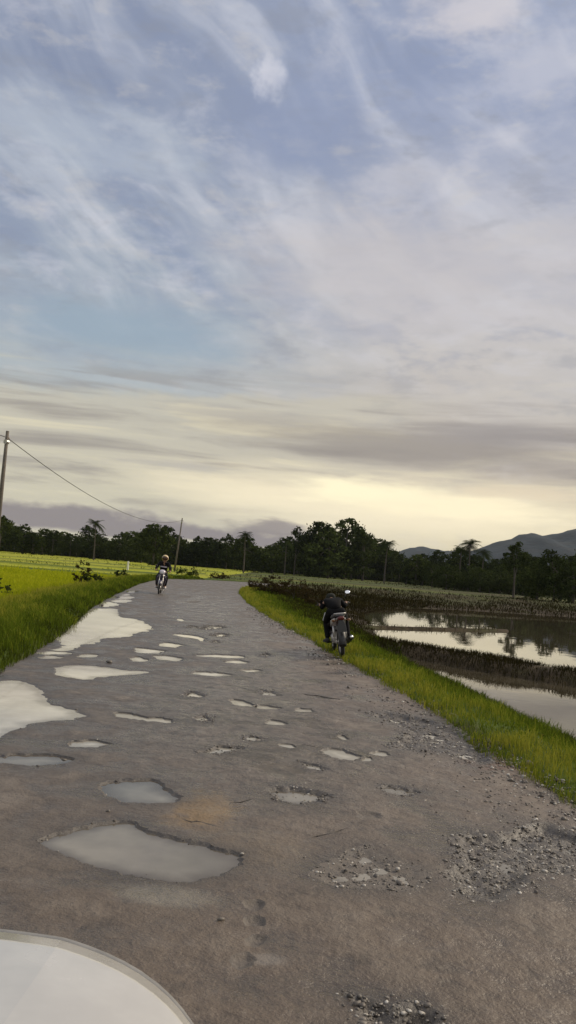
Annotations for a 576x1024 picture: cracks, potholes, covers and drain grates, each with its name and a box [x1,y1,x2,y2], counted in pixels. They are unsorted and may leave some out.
pothole [96,778,184,804]
pothole [67,739,112,747]
pothole [320,747,362,760]
pothole [335,978,452,1024]
pothole [48,608,155,651]
pothole [300,844,443,894]
pothole [376,781,429,801]
pothole [0,679,89,741]
pothole [435,817,576,907]
pothole [36,819,244,883]
pothole [0,753,75,766]
pothole [52,664,151,680]
